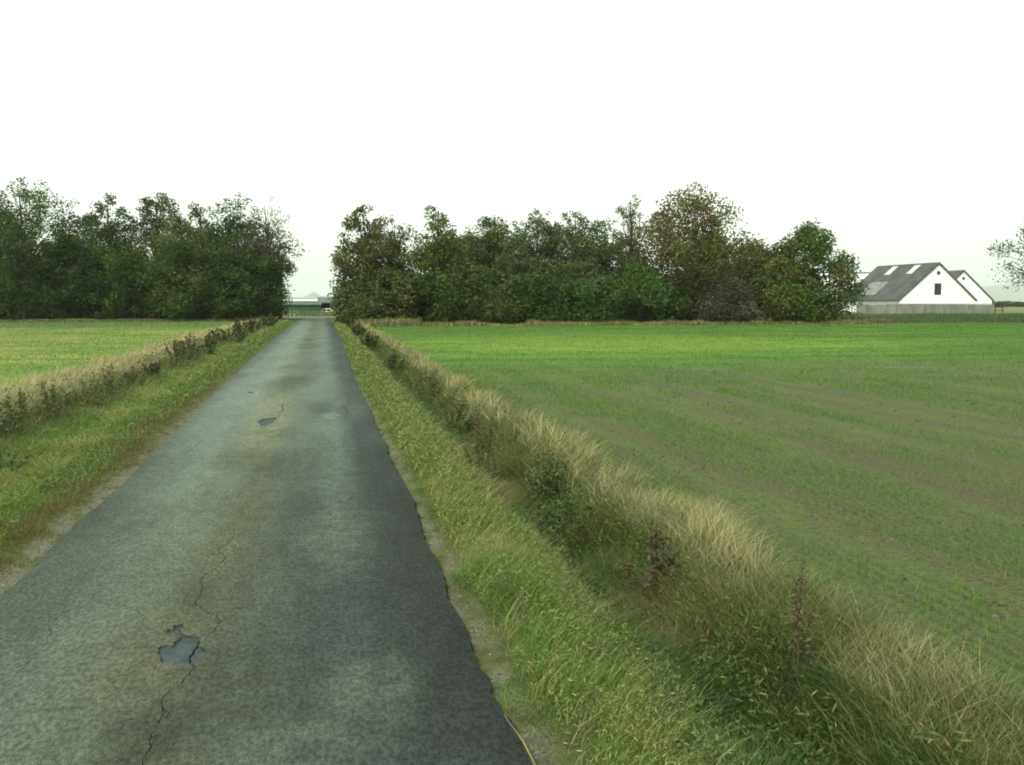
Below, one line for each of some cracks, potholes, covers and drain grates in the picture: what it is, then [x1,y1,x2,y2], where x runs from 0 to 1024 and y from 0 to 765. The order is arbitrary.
pothole [157,624,214,664]
pothole [258,417,278,426]
crack [2,588,74,689]
crack [142,525,235,765]
